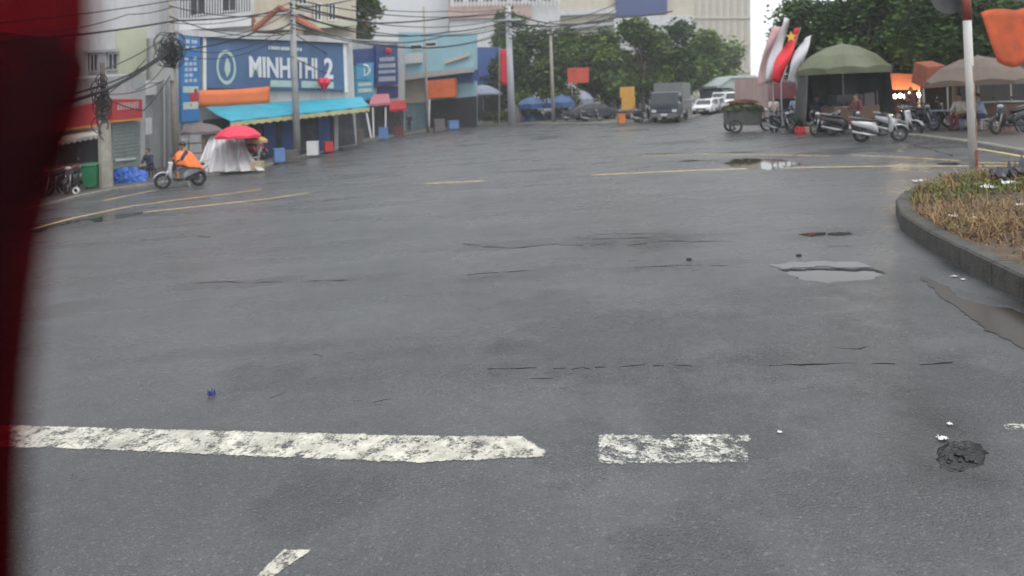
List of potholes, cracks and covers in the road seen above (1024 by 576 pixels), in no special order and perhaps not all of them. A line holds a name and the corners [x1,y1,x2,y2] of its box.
pothole [936,440,989,473]
crack [463,233,724,271]
pothole [778,268,886,283]
crack [487,346,953,379]
